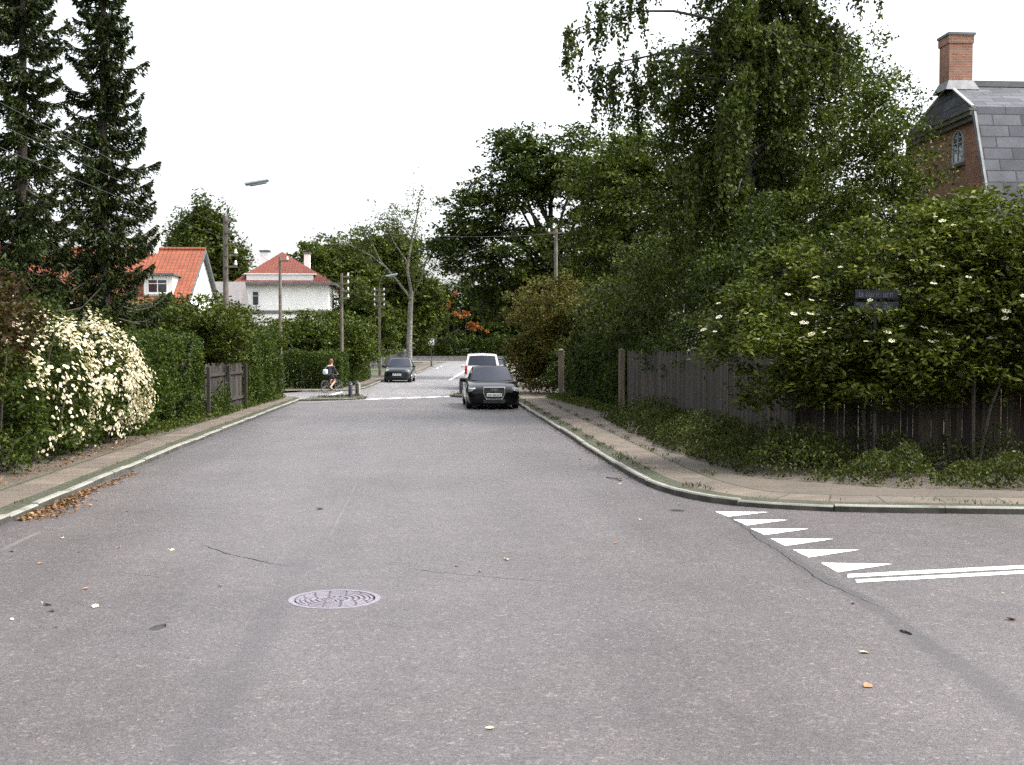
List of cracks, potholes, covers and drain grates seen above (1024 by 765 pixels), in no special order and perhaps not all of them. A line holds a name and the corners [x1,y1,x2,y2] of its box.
manhole cover [288,589,381,609]
crack [730,516,885,610]
crack [204,545,291,567]
